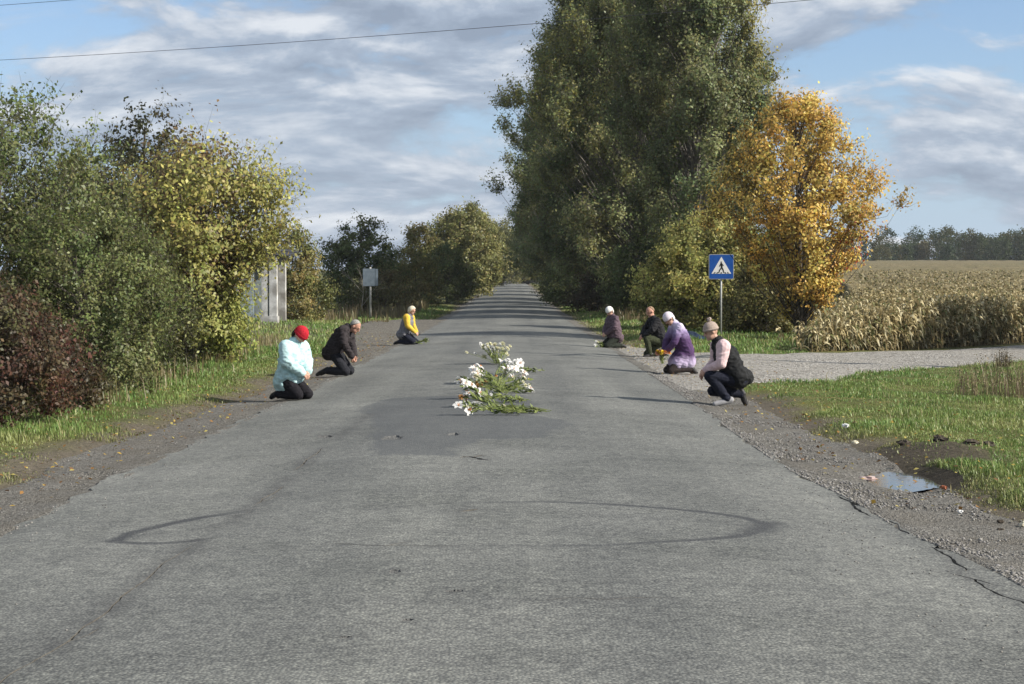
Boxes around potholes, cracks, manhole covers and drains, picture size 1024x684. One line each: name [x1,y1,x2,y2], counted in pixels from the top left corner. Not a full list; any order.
crack [932,547,1024,604]
crack [838,496,869,516]
